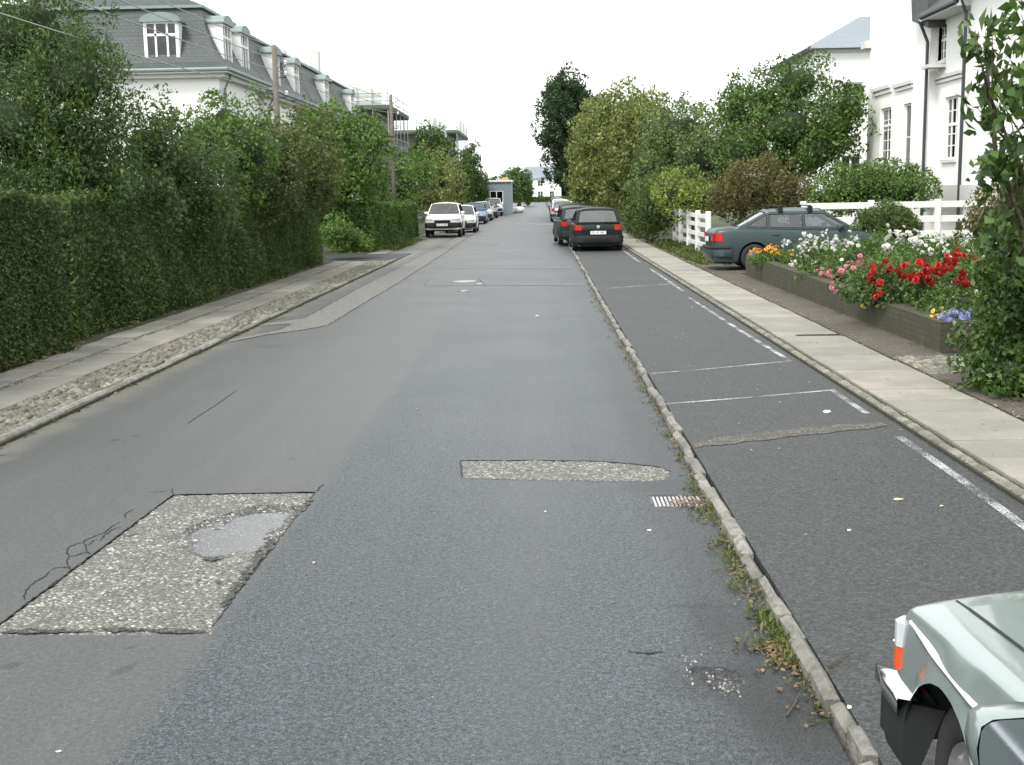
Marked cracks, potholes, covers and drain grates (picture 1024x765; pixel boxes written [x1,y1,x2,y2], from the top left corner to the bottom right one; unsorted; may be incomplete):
drain grate [648,495,705,507]
pothole [682,654,747,697]
crack [23,510,131,600]
